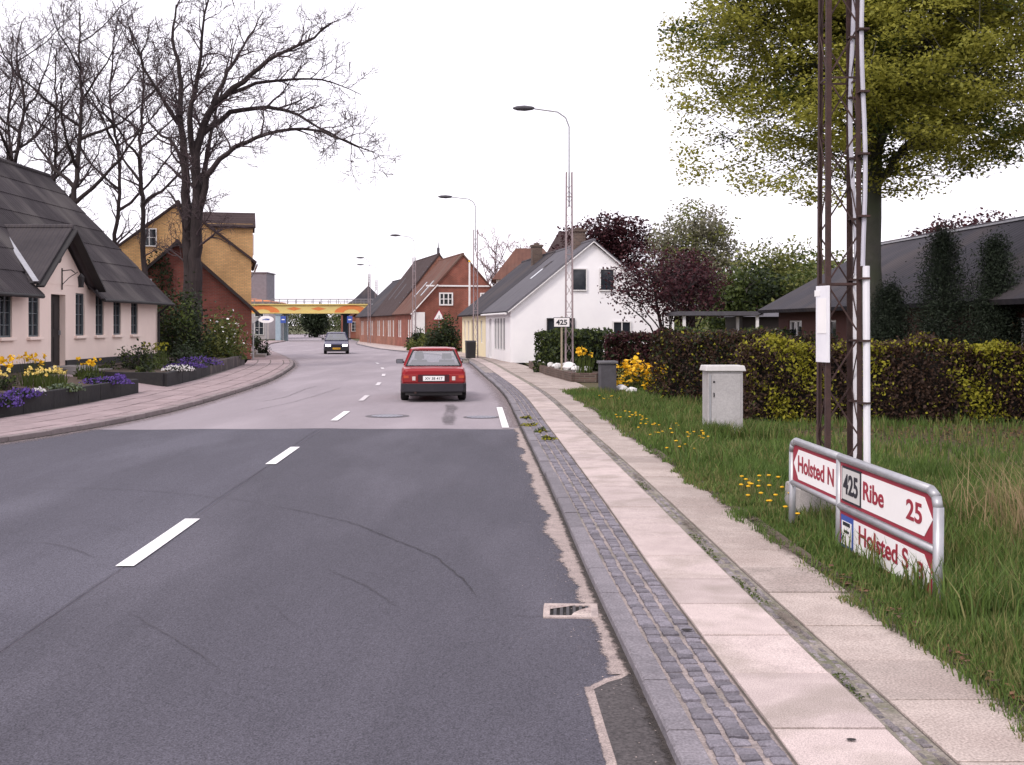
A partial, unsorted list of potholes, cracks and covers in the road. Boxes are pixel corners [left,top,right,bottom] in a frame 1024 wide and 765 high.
crack [6,487,479,597]
crack [131,613,223,672]
